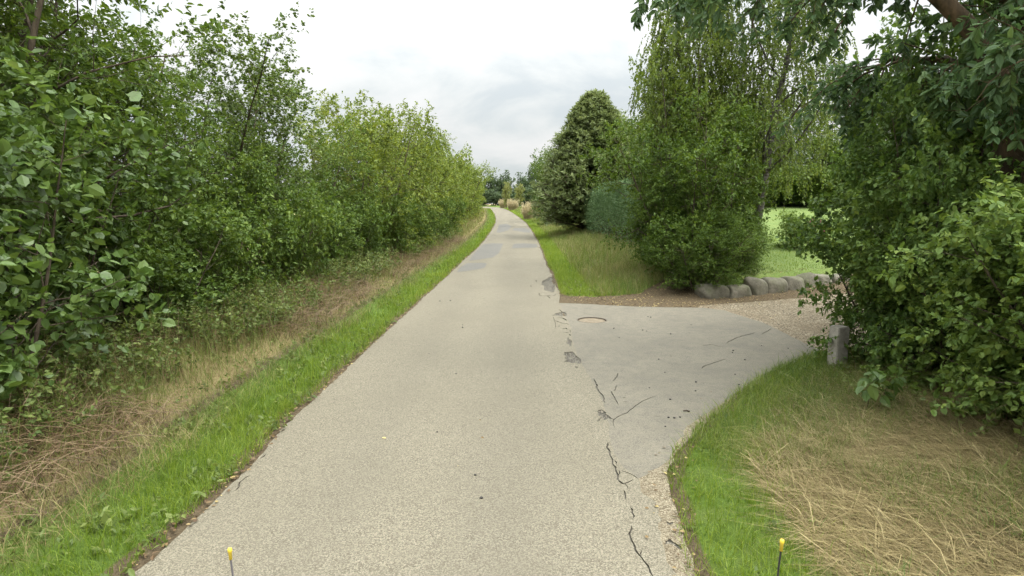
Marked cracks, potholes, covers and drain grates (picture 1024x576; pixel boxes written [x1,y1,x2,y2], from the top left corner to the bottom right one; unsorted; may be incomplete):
crack [594,374,655,426]
pothole [564,352,581,364]
crack [606,444,652,575]
pothole [542,277,555,292]
